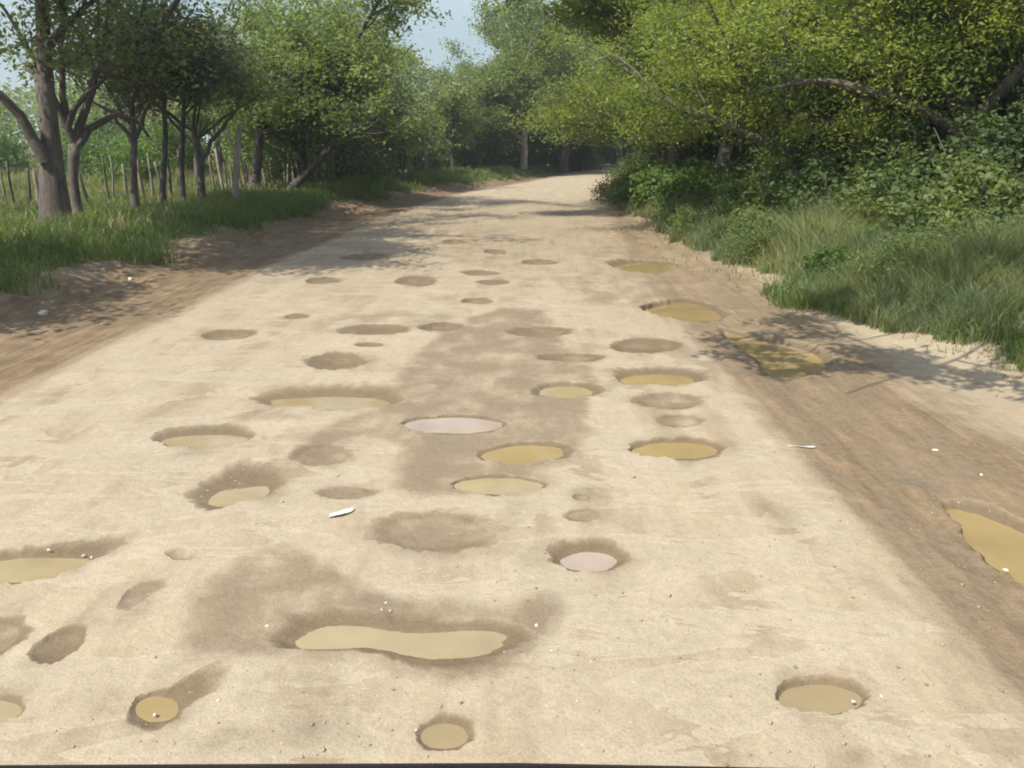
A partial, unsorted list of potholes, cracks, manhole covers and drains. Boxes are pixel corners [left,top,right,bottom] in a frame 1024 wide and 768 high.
pothole [544,536,633,572]
pothole [611,365,710,386]
pothole [940,497,1024,585]
pothole [775,673,872,715]
pothole [627,435,729,461]
pothole [248,383,408,410]
pothole [0,692,27,722]
pothole [399,414,509,435]
pothole [415,712,476,751]
pothole [0,537,127,585]
pothole [125,660,232,732]
pothole [183,457,289,511]
